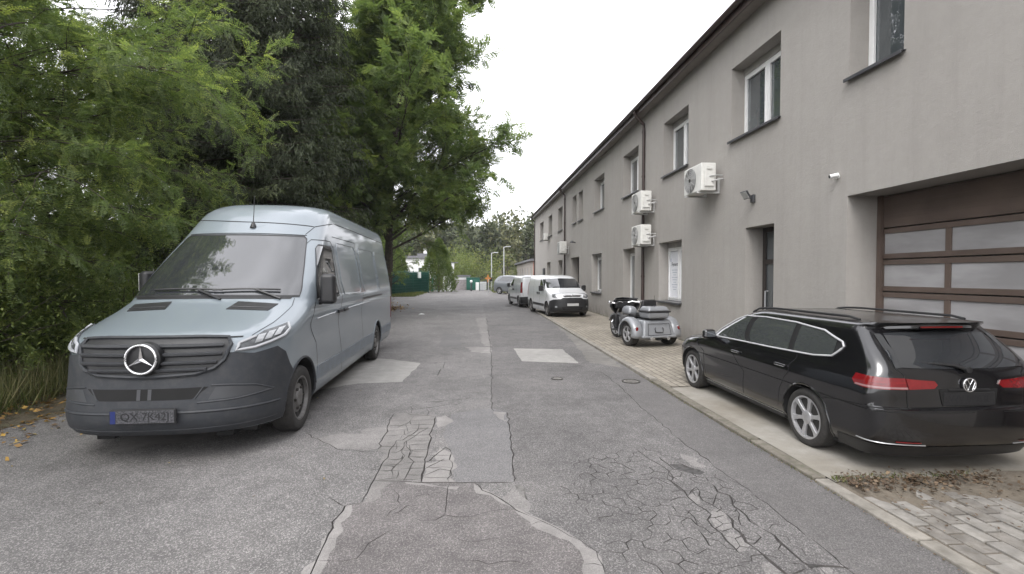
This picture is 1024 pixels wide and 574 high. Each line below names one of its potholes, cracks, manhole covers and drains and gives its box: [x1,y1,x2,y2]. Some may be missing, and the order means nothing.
crack [560,372,854,574]
pothole [670,464,705,475]
crack [306,392,605,574]
